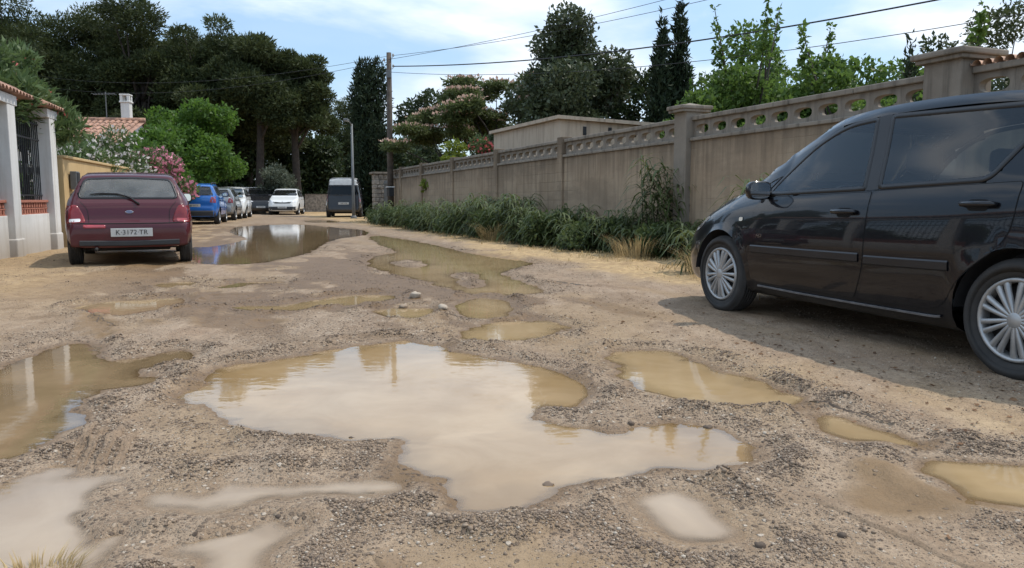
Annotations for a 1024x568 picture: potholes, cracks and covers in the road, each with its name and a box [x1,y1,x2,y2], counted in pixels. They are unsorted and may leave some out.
pothole [66,296,190,316]
pothole [0,458,170,568]
pothole [834,456,1024,523]
pothole [124,470,417,520]
pothole [592,347,825,415]
pothole [608,480,777,553]
pothole [224,293,401,311]
pothole [446,295,522,320]
pothole [0,338,202,464]
pothole [451,314,579,341]
pothole [800,410,956,454]
pothole [165,335,776,515]
